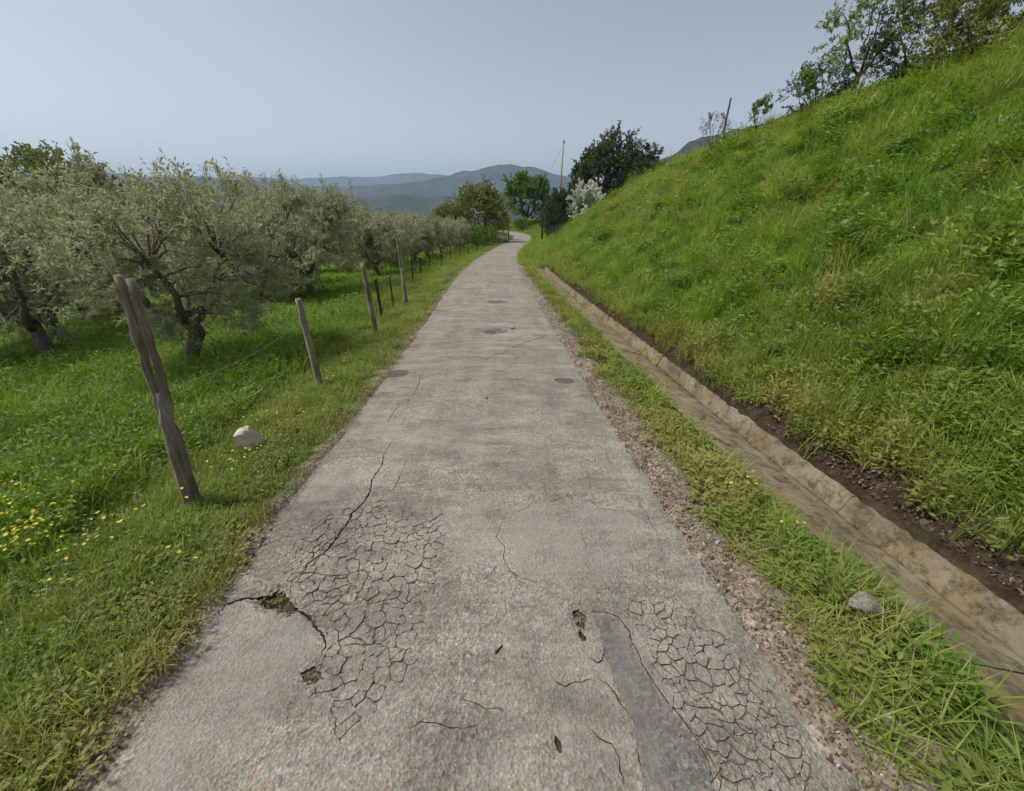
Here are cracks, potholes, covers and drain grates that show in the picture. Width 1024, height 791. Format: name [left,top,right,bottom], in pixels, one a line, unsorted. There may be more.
crack [554,600,829,791]
pothole [257,590,297,615]
pothole [300,666,322,686]
crack [282,376,449,744]
pothole [572,609,587,630]
crack [408,699,504,729]
